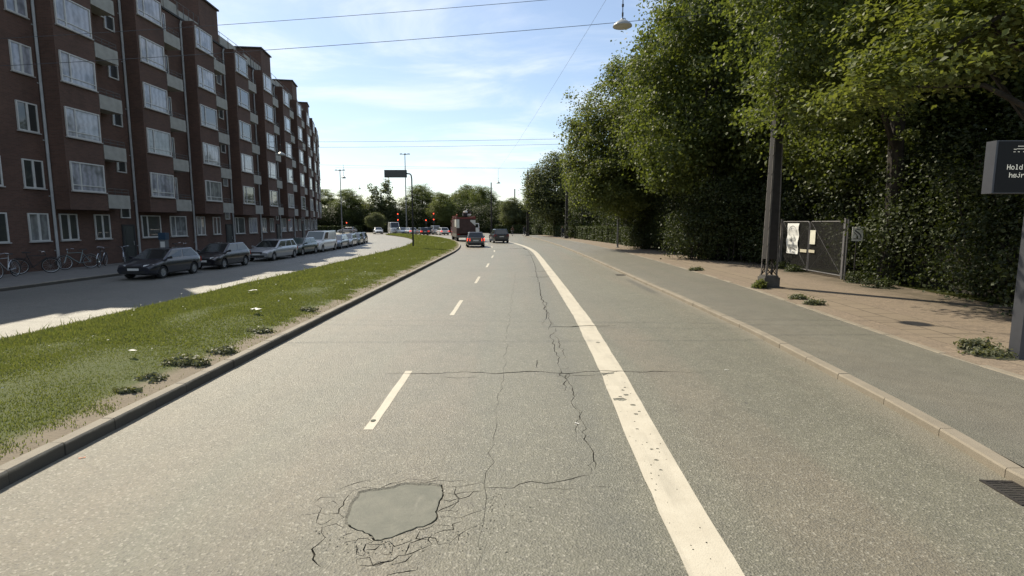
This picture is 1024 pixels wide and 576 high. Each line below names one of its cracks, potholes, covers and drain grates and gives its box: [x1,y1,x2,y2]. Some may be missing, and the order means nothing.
crack [306,251,690,575]
drain grate [979,480,1024,506]
